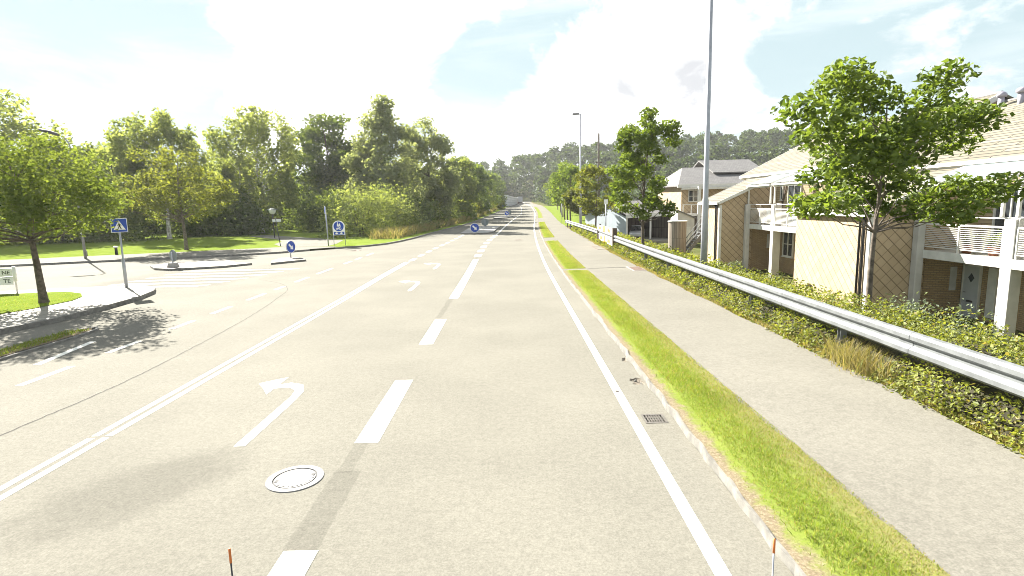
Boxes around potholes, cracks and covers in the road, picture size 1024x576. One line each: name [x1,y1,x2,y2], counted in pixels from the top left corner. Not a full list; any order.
manhole cover [265,465,324,493]
drain grate [641,414,669,424]
